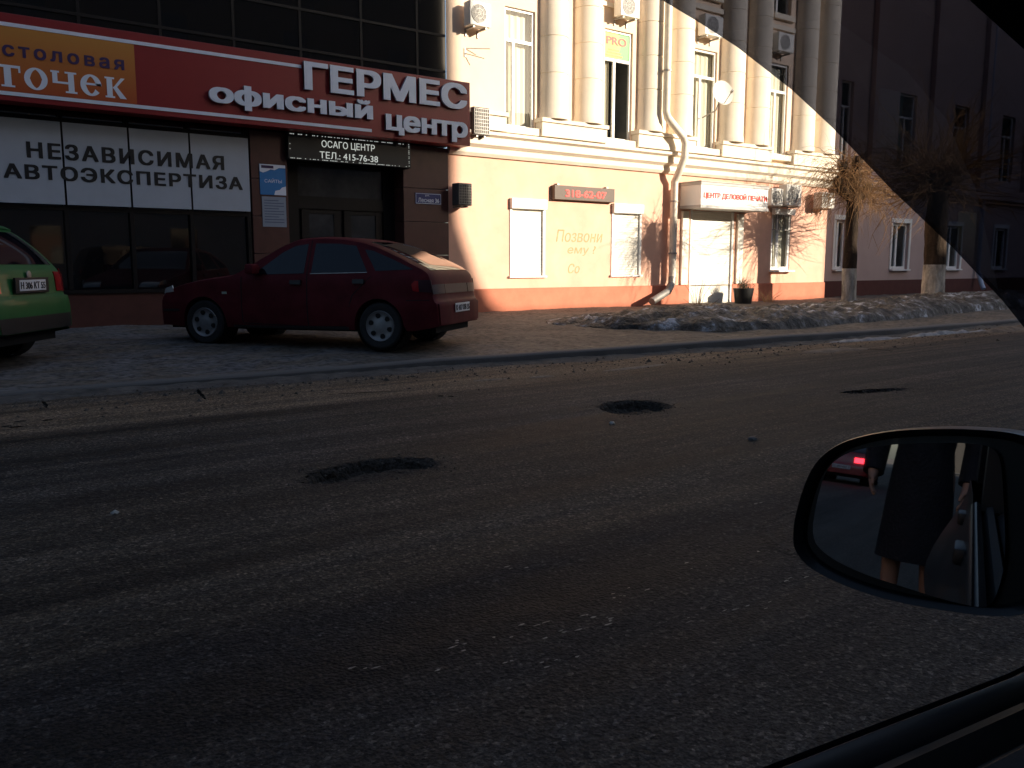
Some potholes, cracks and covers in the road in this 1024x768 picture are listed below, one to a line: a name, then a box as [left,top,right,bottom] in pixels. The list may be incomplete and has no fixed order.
pothole [294,456,444,485]
pothole [595,400,674,415]
